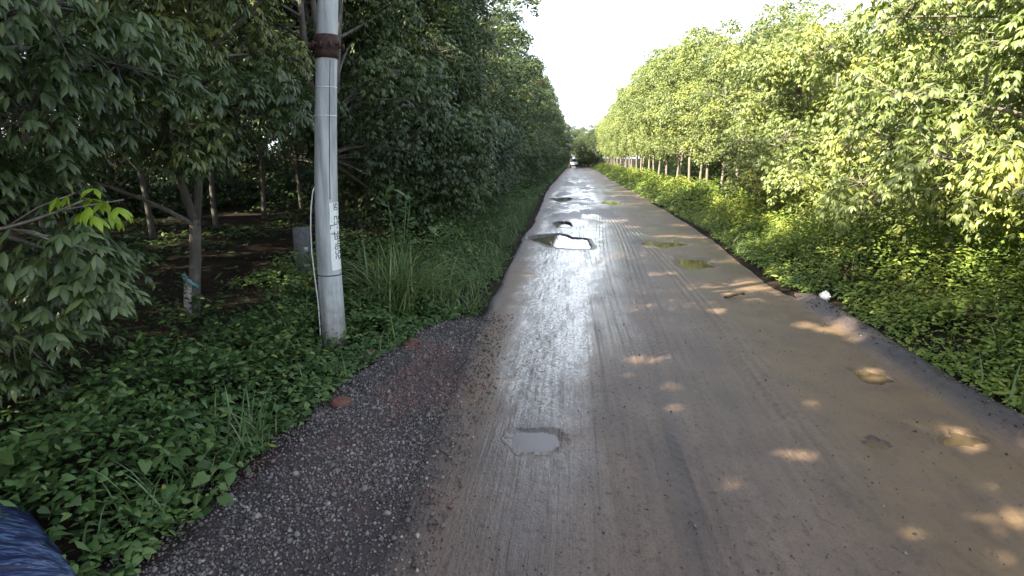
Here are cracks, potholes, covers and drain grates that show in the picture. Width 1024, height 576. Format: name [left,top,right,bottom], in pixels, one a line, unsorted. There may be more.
pothole [843,366,902,387]
pothole [626,239,695,249]
pothole [934,427,995,449]
pothole [500,426,574,457]
pothole [523,233,598,251]
pothole [860,434,895,451]
pothole [670,255,724,272]
